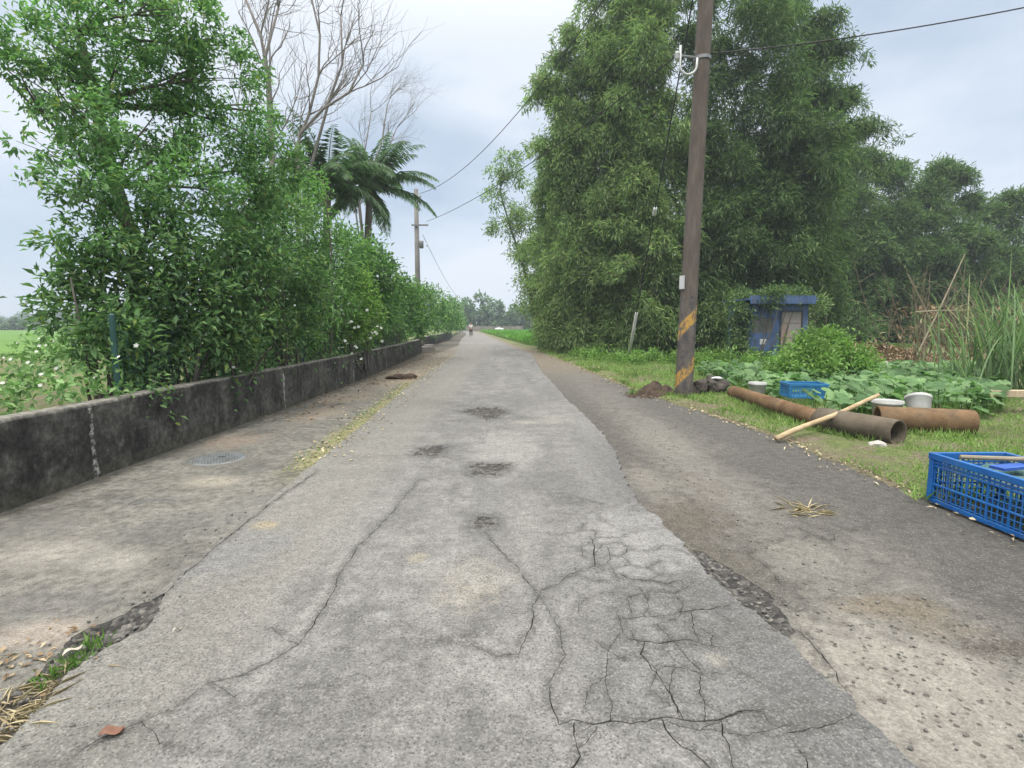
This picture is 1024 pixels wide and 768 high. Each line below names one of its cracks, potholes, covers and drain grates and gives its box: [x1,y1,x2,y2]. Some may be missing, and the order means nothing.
pothole [470,463,511,476]
crack [498,543,808,768]
pothole [462,407,508,421]
pothole [474,517,494,529]
pothole [692,550,795,639]
pothole [414,446,448,456]
manhole cover [181,451,252,467]
